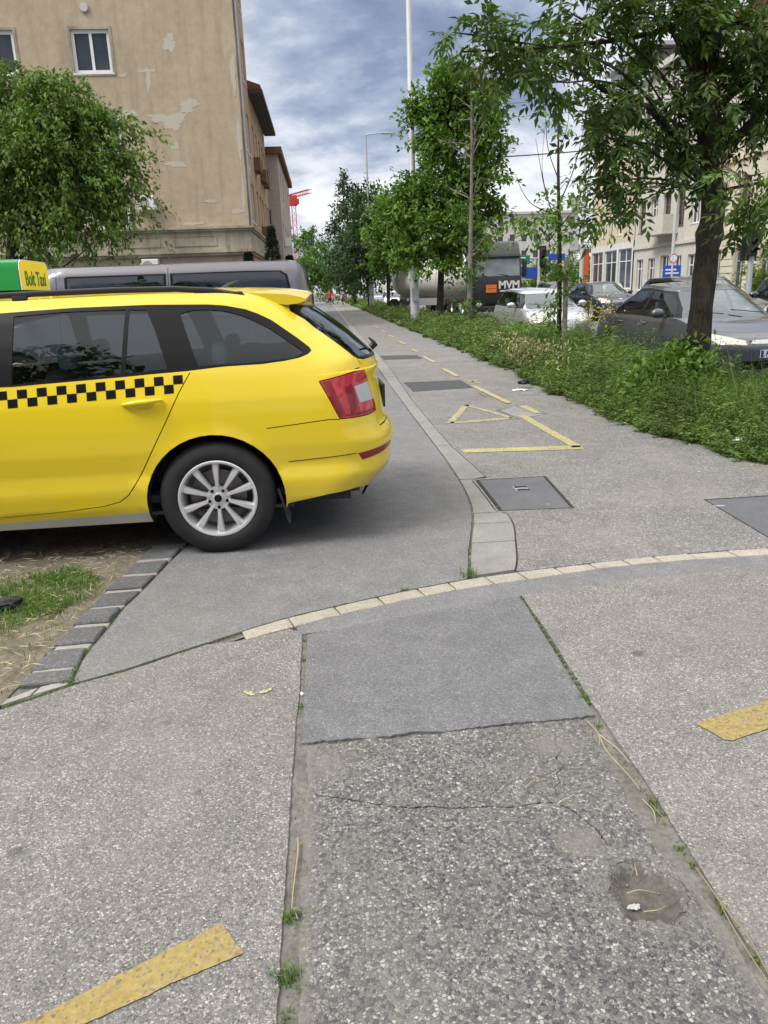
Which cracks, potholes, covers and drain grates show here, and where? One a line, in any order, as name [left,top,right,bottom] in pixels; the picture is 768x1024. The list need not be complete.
crack [277,599,768,1024]
manhole cover [704,495,768,537]
manhole cover [476,476,574,511]
pothole [607,859,690,926]
